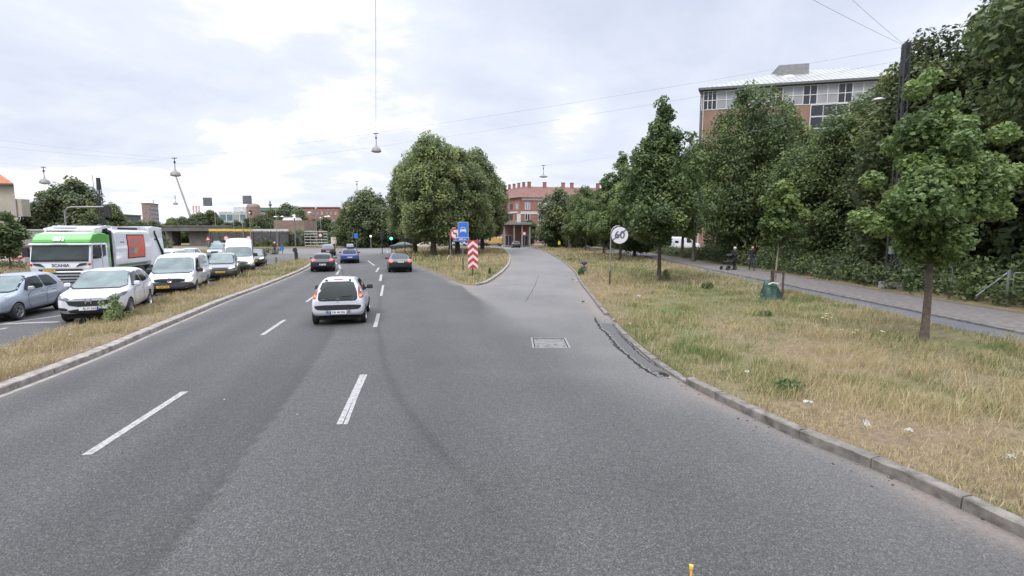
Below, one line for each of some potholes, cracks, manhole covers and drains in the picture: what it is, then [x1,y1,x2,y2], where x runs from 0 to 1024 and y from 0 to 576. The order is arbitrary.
manhole cover [531,338,571,348]
